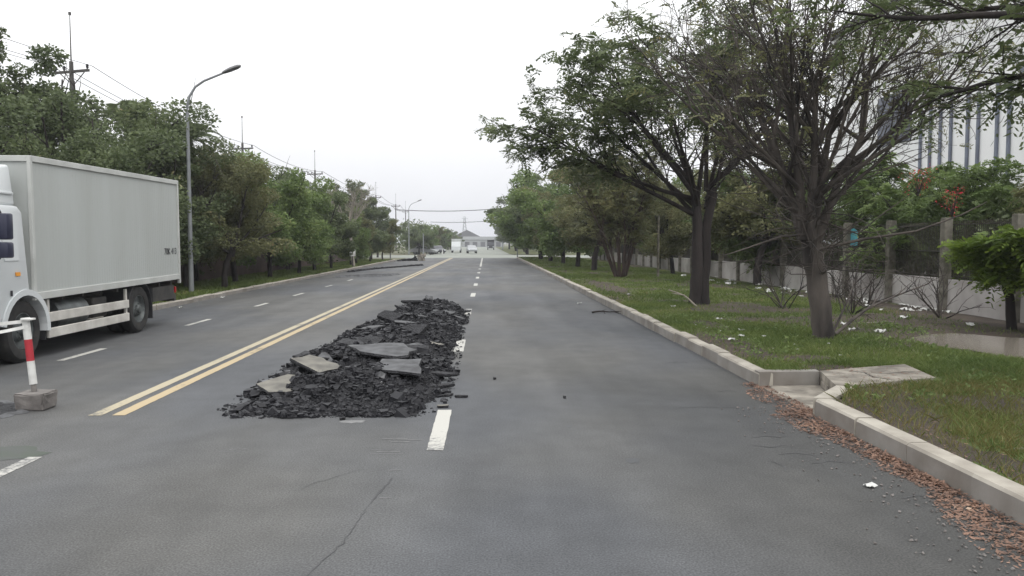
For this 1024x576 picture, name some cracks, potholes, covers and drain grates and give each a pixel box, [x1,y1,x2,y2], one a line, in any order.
crack [751,435,847,471]
crack [307,478,392,576]
